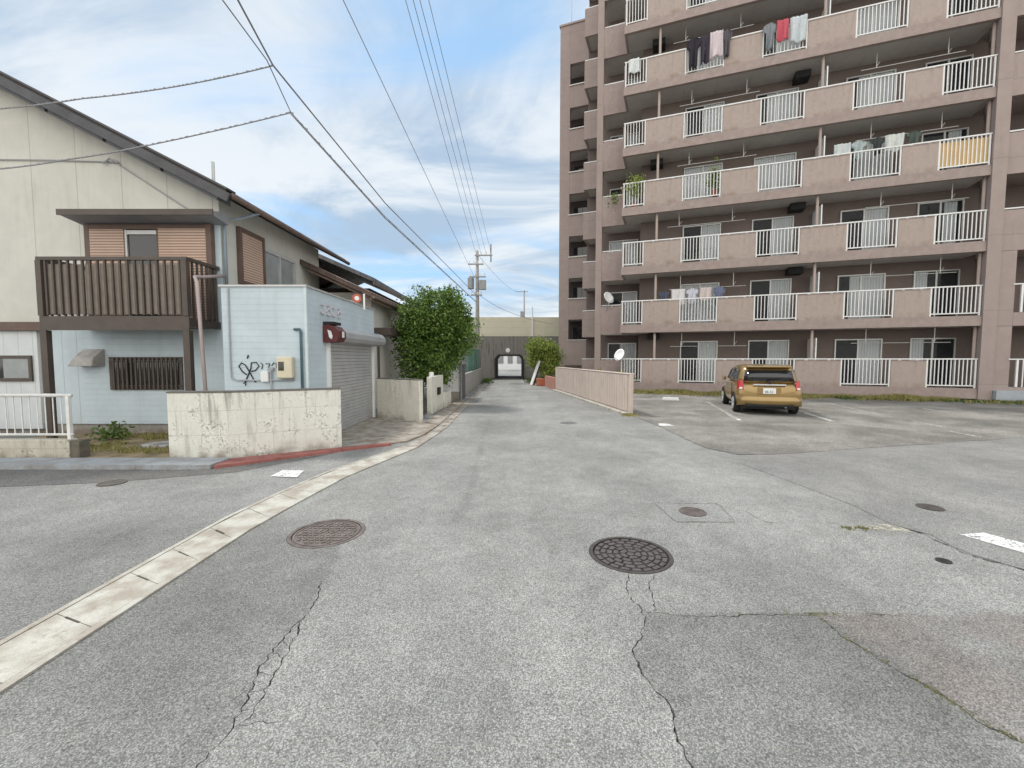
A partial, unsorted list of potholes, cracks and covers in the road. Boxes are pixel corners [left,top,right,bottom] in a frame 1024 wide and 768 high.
manhole cover [287,519,365,549]
manhole cover [679,507,707,517]
crack [233,586,320,728]
manhole cover [589,537,673,574]
crack [626,576,692,768]
manhole cover [915,503,945,511]
